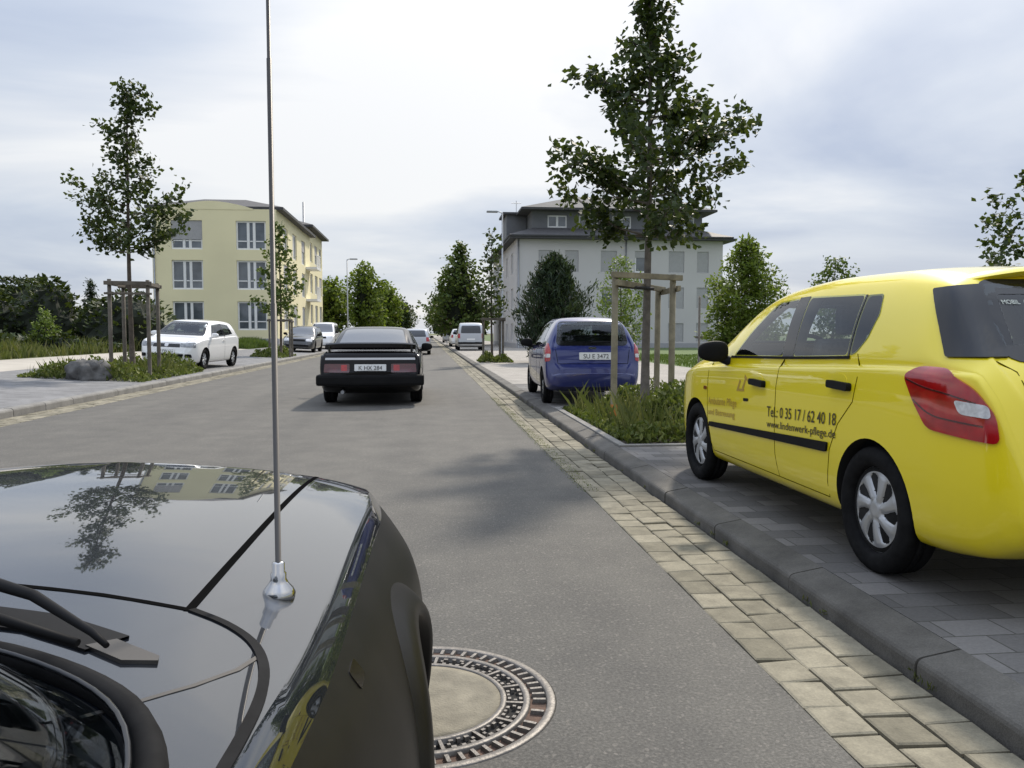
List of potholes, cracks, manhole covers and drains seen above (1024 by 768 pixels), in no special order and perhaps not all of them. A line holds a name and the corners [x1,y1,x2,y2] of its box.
manhole cover [429,646,556,768]
